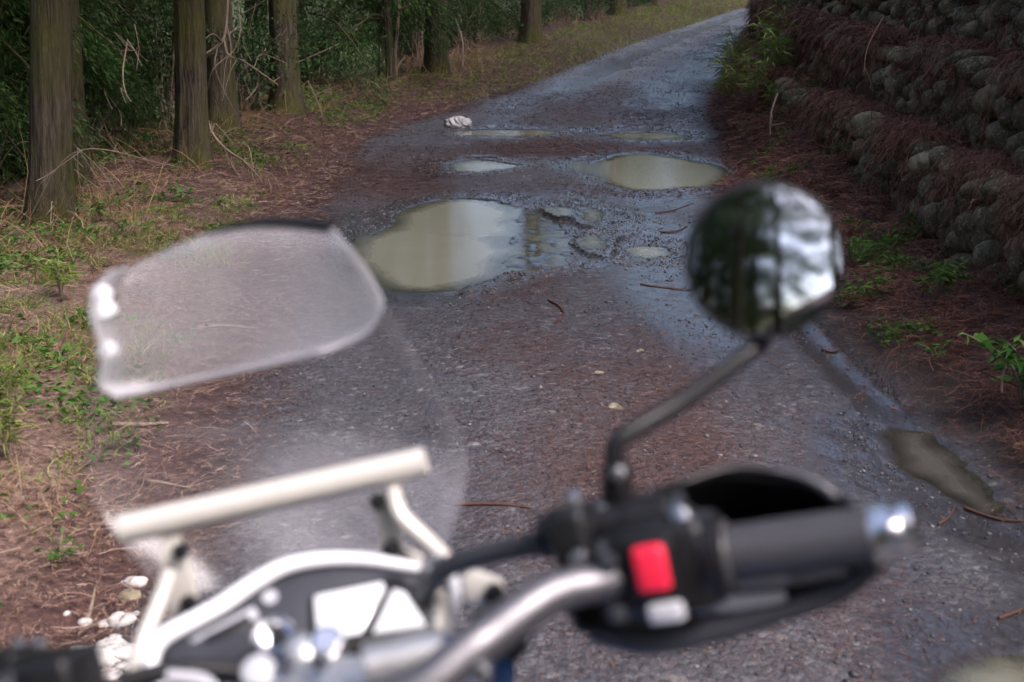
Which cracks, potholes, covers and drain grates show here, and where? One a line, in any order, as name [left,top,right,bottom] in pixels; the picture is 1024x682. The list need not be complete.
pothole [575,205,614,224]
pothole [594,131,701,141]
pothole [333,196,582,295]
pothole [864,421,1024,525]
pothole [560,151,738,193]
pothole [436,158,525,173]
pothole [616,241,683,262]
pothole [443,128,566,137]
pothole [571,231,618,254]
